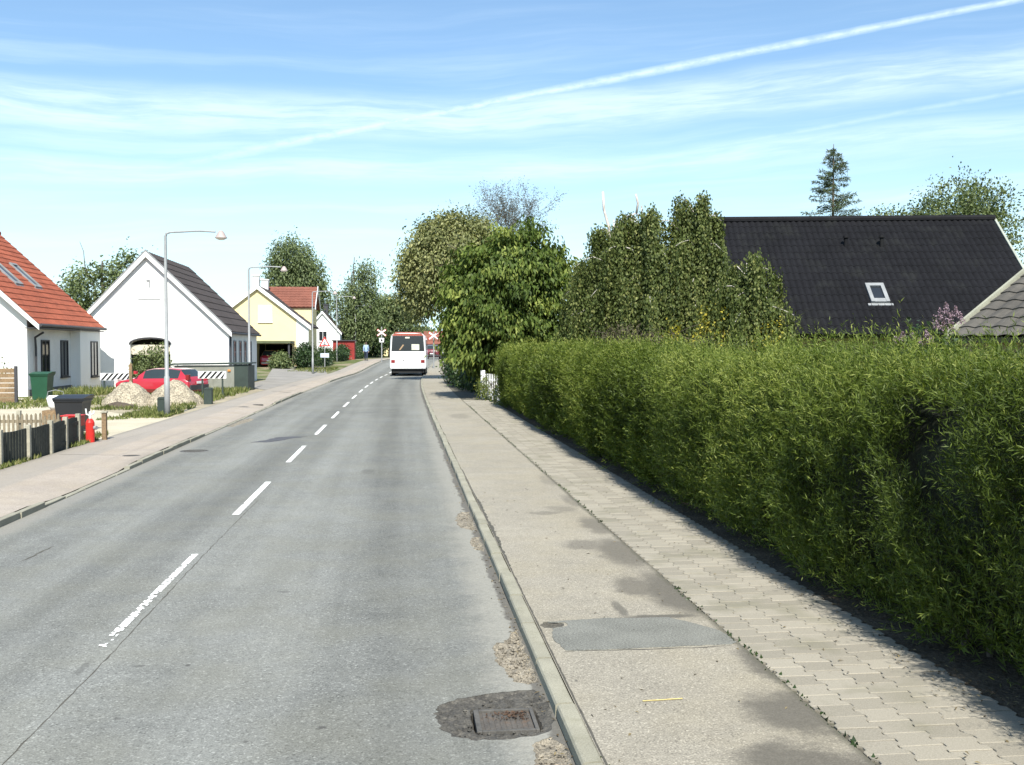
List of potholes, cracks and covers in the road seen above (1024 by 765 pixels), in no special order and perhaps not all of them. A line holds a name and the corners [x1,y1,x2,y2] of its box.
pothole [455,512,477,530]
pothole [470,537,484,552]
pothole [492,630,539,684]
